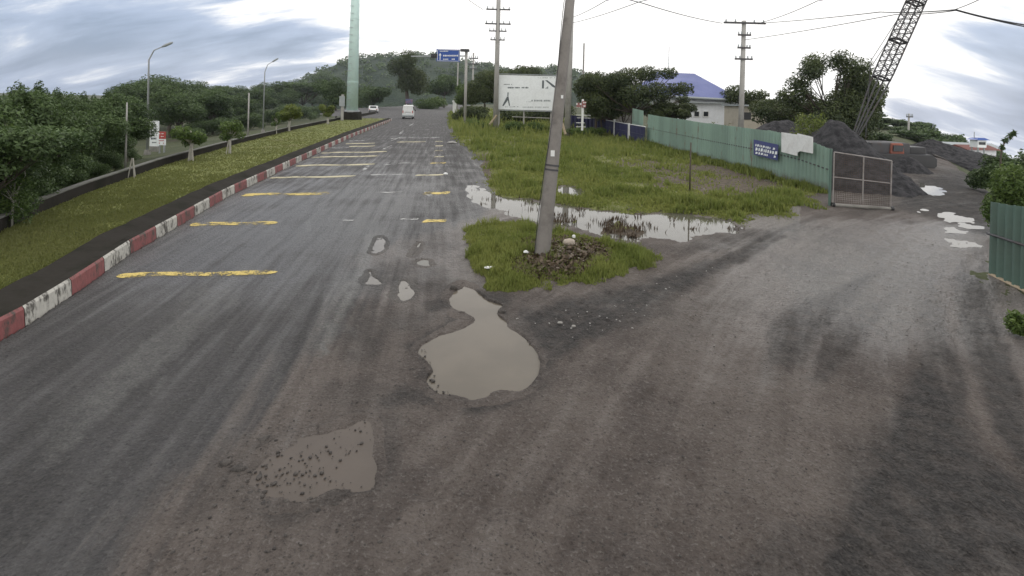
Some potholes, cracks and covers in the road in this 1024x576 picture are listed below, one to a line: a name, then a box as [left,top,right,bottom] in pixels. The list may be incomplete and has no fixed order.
pothole [410,280,549,408]
pothole [366,235,390,255]
pothole [358,269,388,287]
pothole [386,278,421,303]
pothole [411,258,437,268]
pothole [226,412,388,515]
